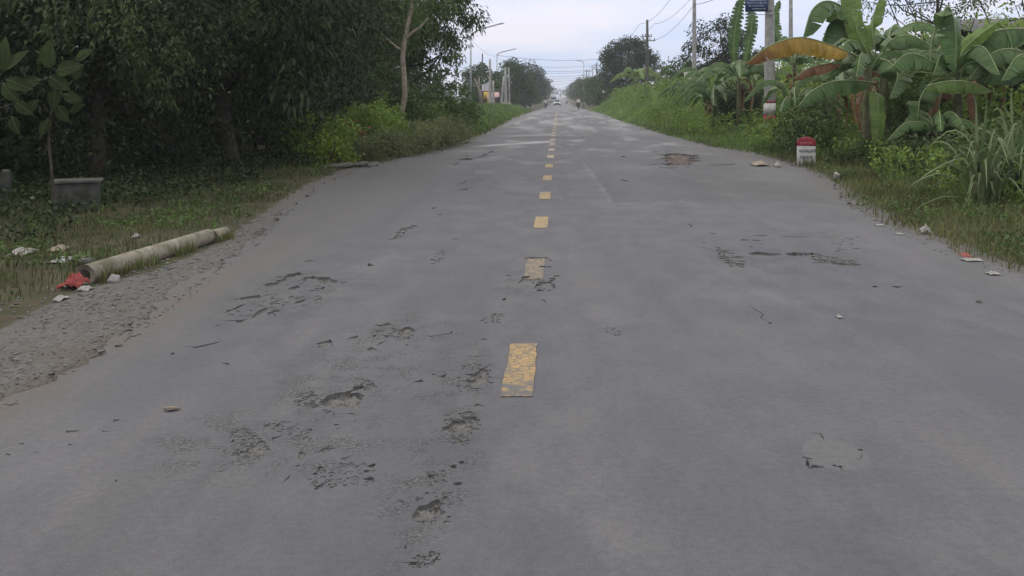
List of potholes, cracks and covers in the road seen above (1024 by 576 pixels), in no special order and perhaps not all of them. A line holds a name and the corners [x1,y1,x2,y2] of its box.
pothole [456,355,494,392]
crack [388,207,440,240]
crack [403,551,441,568]
crack [452,151,494,190]
pothole [649,153,701,168]
pothole [293,378,379,447]
pothole [442,411,481,445]
crack [214,260,348,327]
pothole [401,492,451,549]
